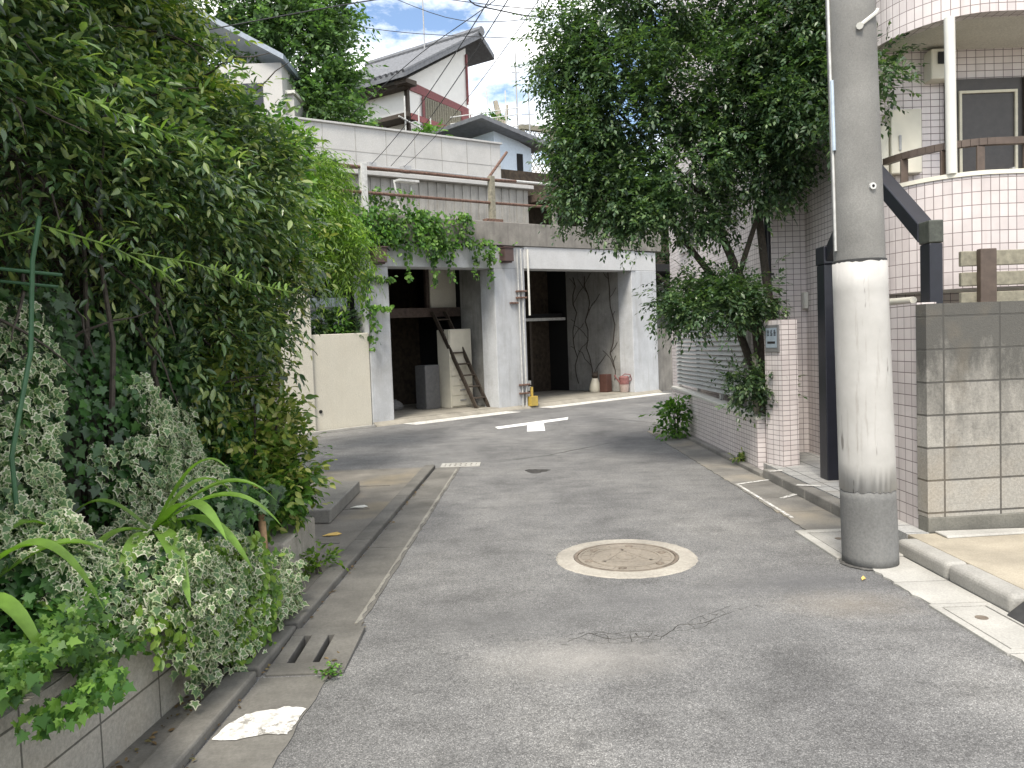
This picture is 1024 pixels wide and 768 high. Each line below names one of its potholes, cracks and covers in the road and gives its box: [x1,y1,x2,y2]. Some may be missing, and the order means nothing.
crack [553,605,762,645]
manhole cover [929,602,1024,656]
manhole cover [556,539,698,579]
